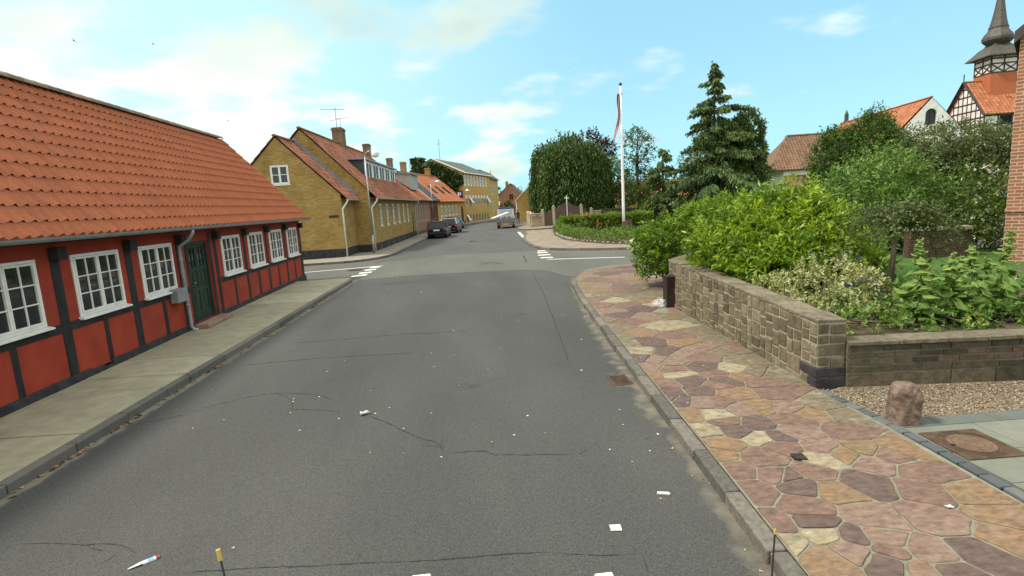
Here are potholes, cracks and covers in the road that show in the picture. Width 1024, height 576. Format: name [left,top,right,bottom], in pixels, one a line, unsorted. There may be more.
manhole cover [918,429,1024,461]
crack [149,393,341,422]
drain grate [606,374,634,386]
crack [244,331,451,366]
crack [371,416,585,455]
crack [186,552,649,573]
crack [28,543,135,565]
